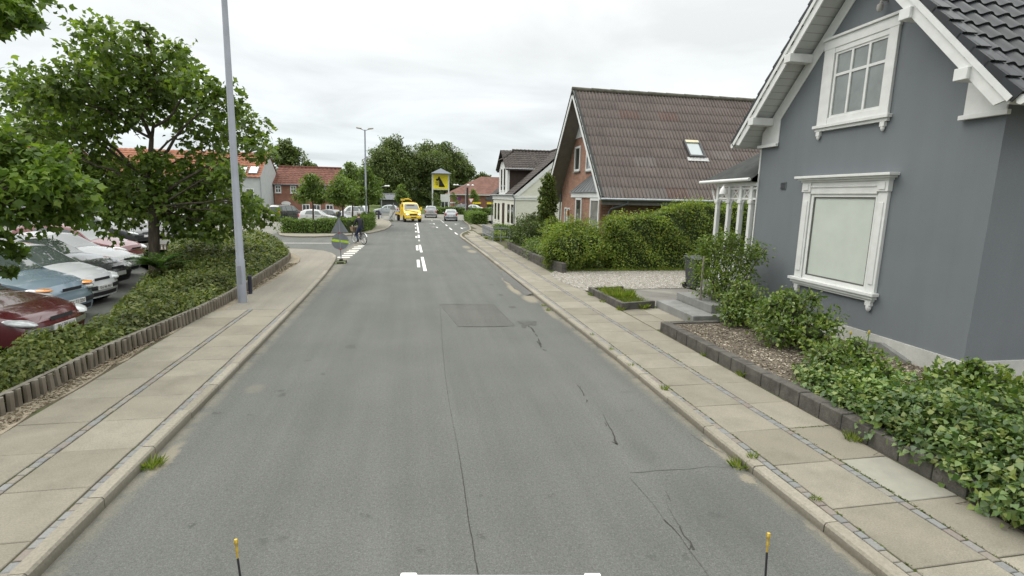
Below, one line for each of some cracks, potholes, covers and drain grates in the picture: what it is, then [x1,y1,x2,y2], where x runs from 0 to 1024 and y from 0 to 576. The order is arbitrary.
crack [518,321,544,350]
crack [630,466,711,576]
